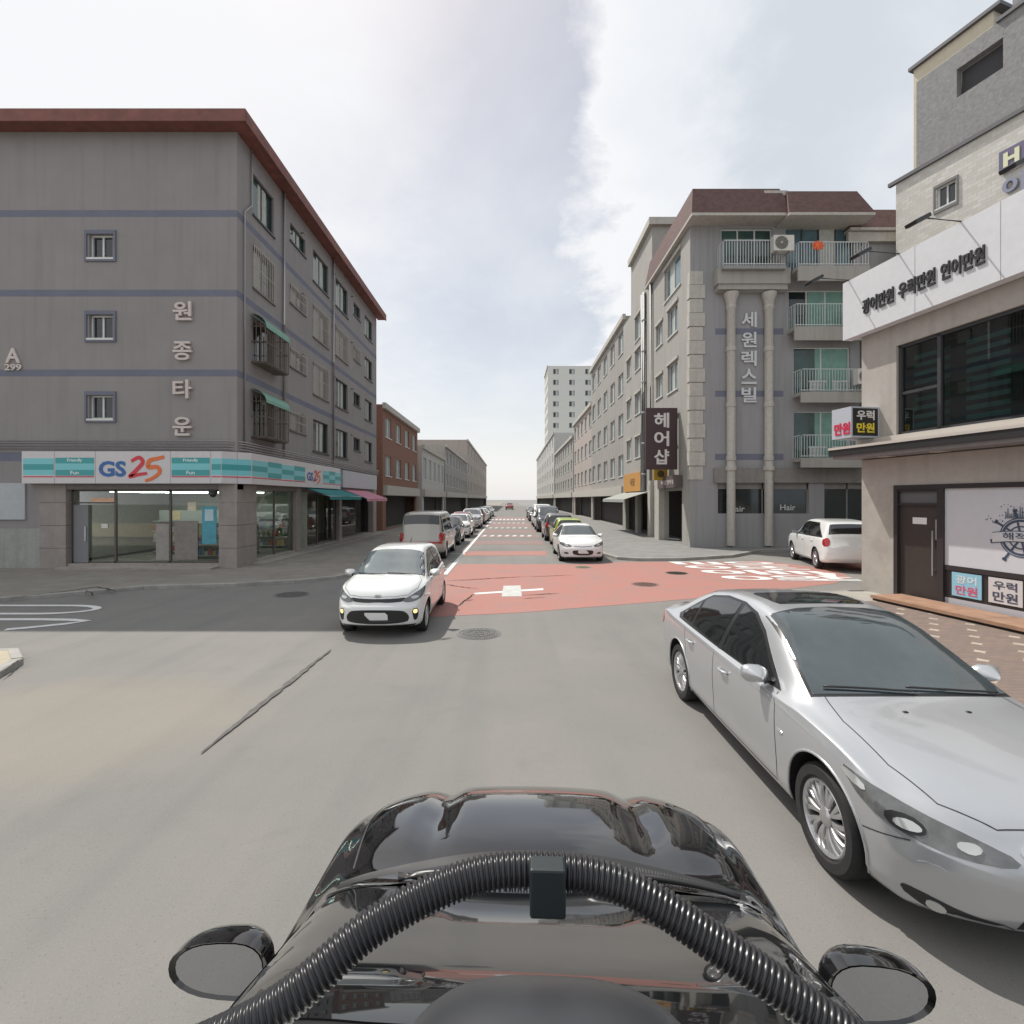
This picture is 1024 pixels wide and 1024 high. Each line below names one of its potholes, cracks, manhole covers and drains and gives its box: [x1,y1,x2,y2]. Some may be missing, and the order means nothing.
manhole cover [457,628,501,640]
